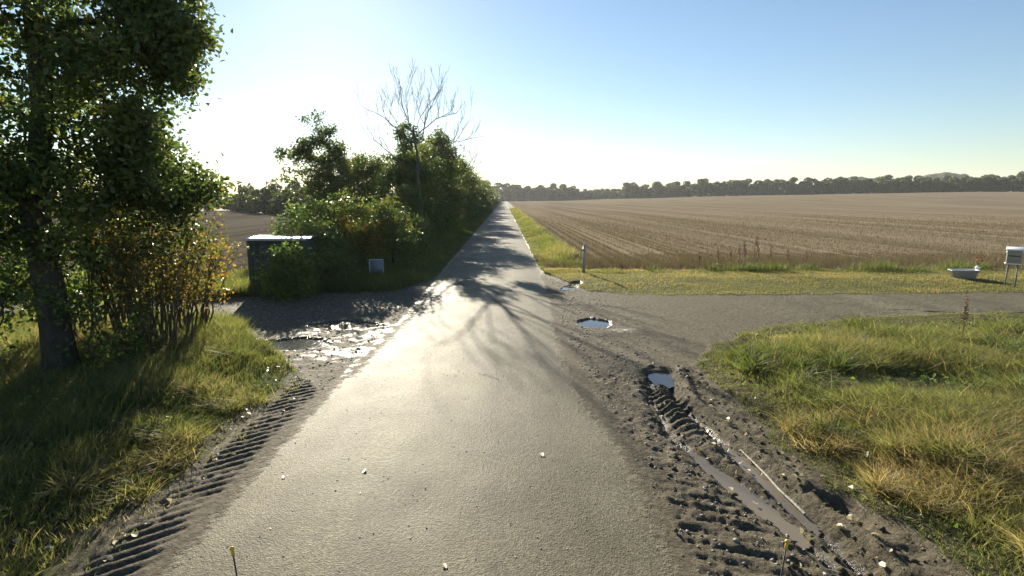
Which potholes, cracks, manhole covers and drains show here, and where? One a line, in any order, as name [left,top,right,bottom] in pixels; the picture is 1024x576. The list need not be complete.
pothole [264,336,334,352]
pothole [575,317,613,329]
pothole [560,280,584,290]
pothole [304,319,384,331]
